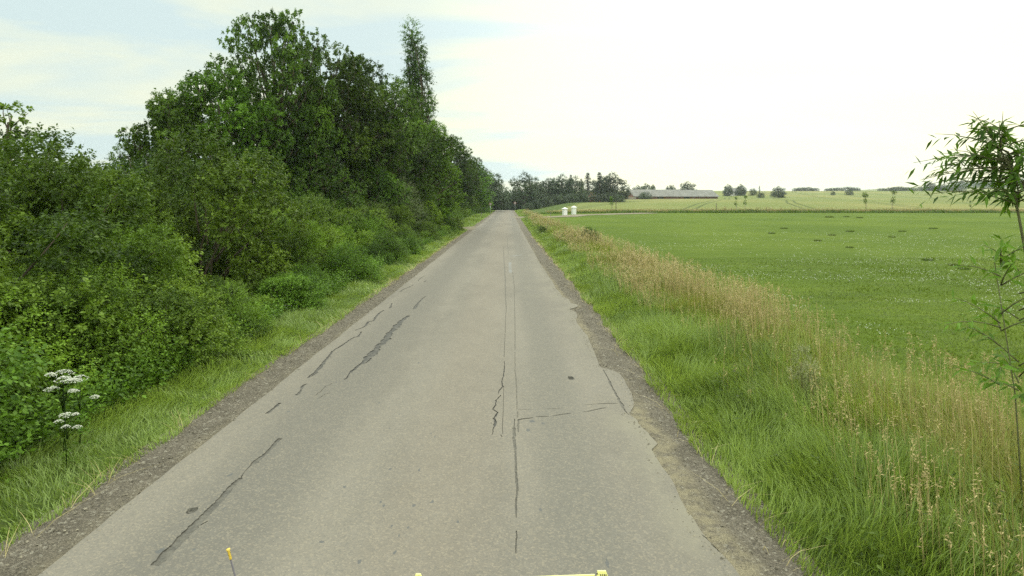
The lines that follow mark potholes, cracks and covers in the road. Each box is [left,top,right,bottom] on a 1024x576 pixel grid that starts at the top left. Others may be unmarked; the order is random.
crack [266,276,426,414]
crack [492,361,629,434]
